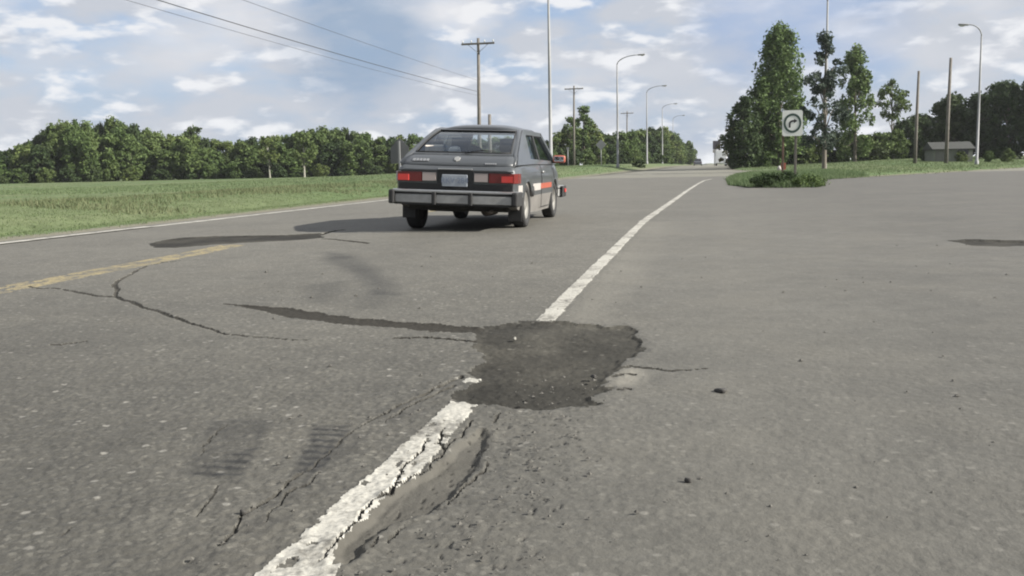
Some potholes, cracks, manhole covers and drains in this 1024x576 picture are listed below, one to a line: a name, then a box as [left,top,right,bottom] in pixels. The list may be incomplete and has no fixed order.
crack [197,375,465,547]
pothole [332,427,491,565]
crack [28,260,484,346]
crack [611,365,708,390]
